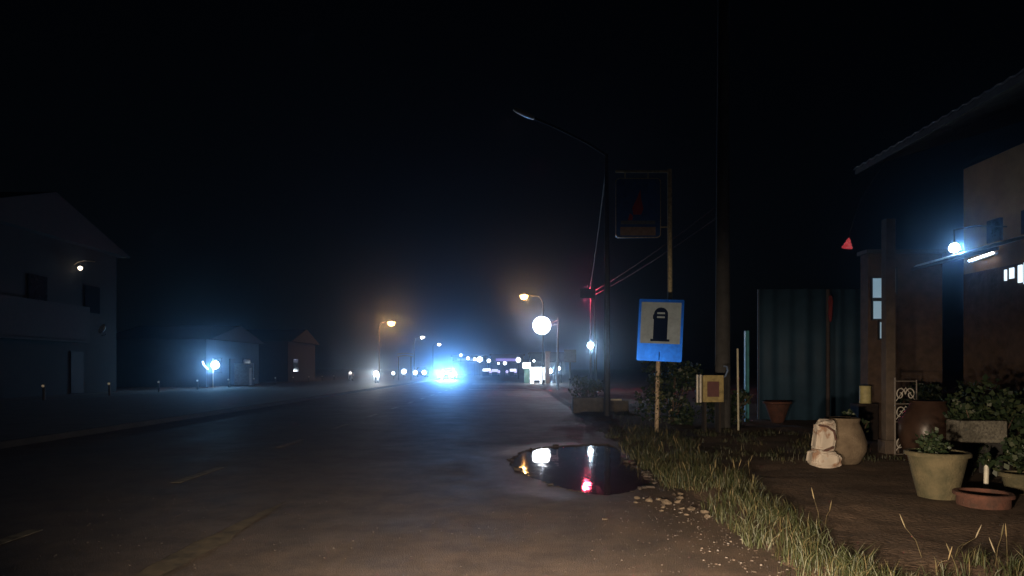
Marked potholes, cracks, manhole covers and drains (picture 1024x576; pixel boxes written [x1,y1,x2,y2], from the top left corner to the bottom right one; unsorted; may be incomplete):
pothole [507,444,658,493]
